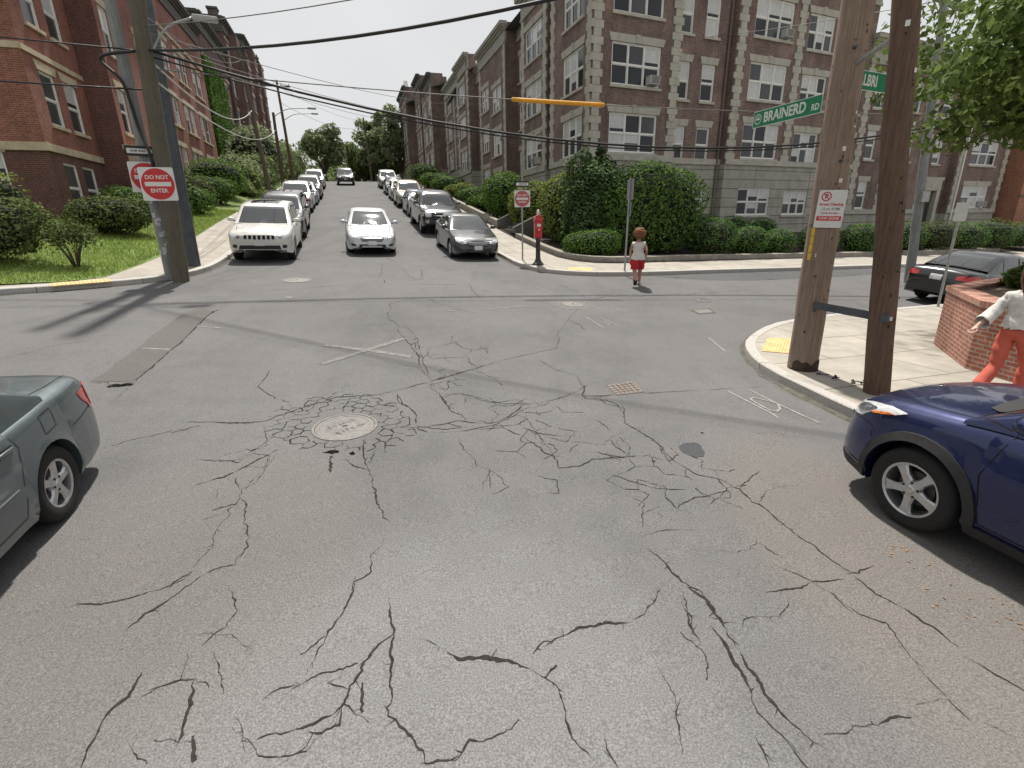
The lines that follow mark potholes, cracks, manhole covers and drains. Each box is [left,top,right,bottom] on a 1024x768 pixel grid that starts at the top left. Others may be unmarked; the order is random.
crack [73,299,1023,768]
manhole cover [550,298,596,310]
manhole cover [311,414,377,441]
